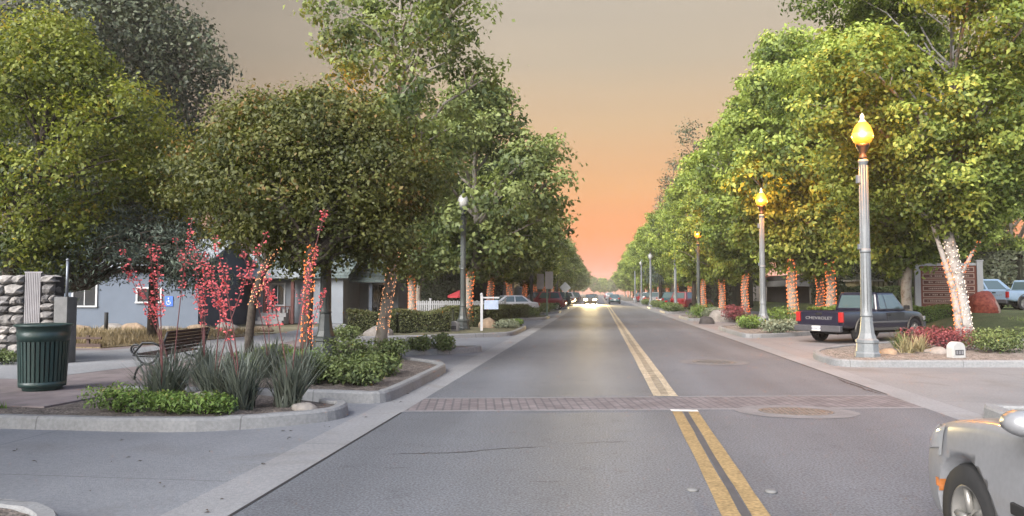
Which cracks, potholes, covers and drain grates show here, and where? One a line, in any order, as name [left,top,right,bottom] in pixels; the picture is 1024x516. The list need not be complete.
manhole cover [734,405,861,419]
crack [400,446,543,468]
